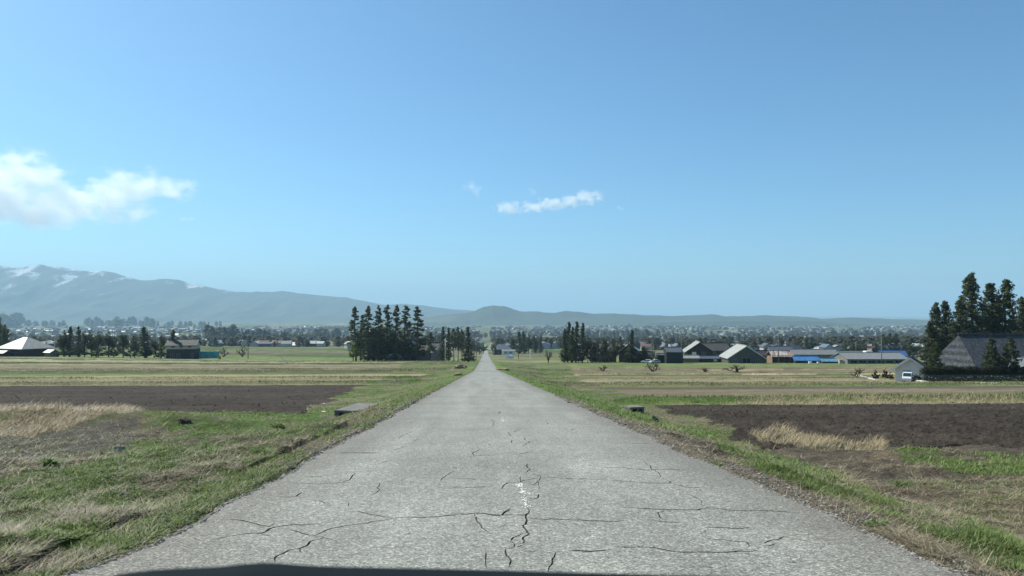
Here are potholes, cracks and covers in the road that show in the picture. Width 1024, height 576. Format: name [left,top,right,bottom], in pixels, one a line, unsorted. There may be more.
crack [217,408,798,572]
